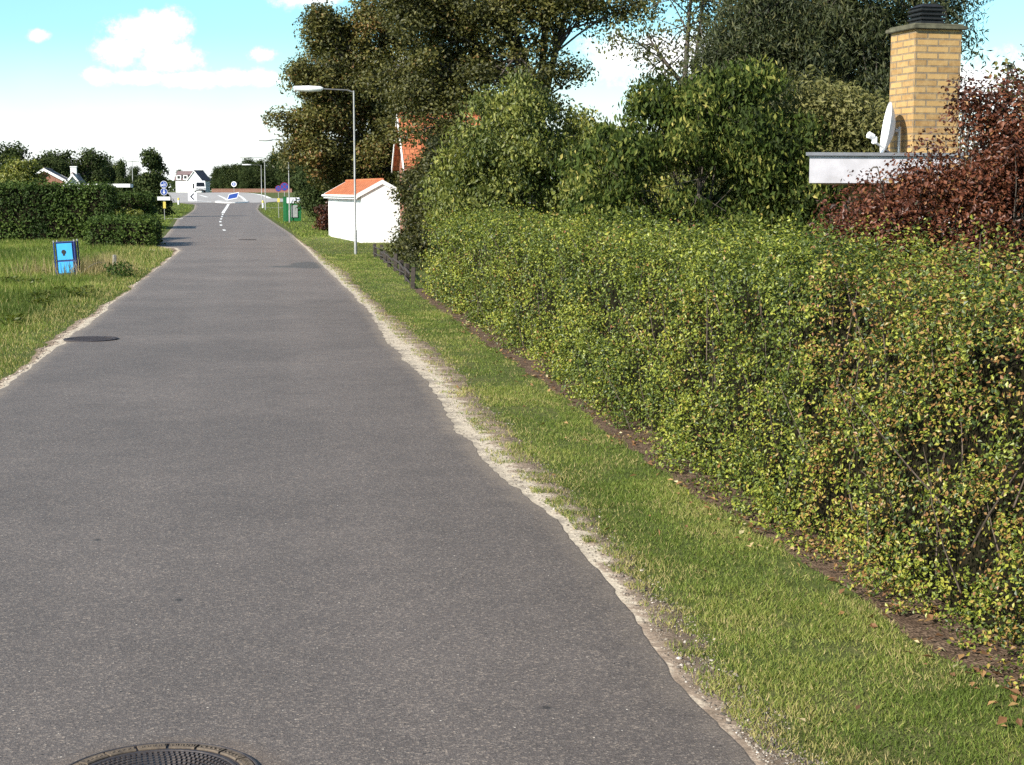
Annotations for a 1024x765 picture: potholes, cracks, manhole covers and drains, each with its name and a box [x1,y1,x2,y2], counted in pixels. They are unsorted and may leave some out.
manhole cover [69,742,259,765]
